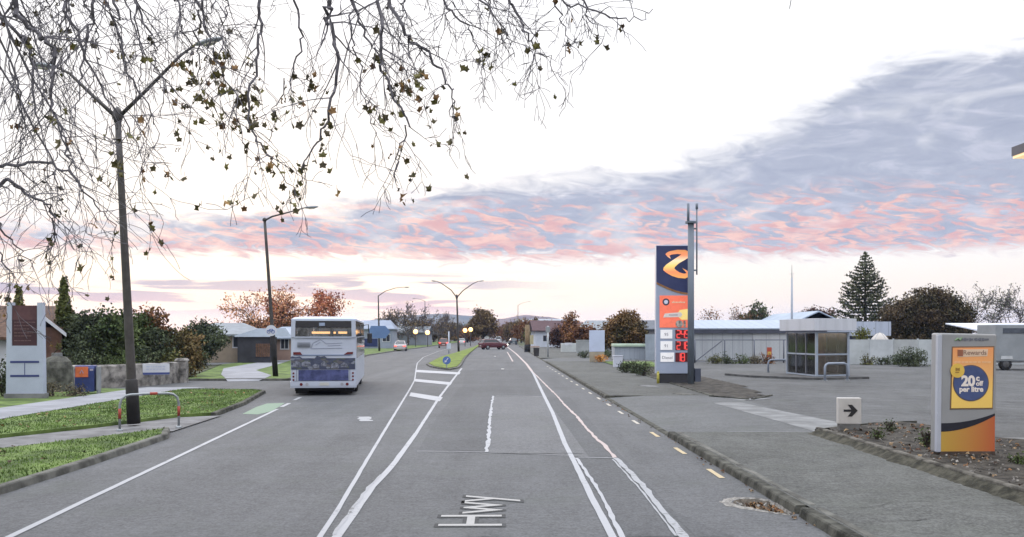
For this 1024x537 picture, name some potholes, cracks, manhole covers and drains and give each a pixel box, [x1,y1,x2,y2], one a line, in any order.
pothole [719,497,793,515]
